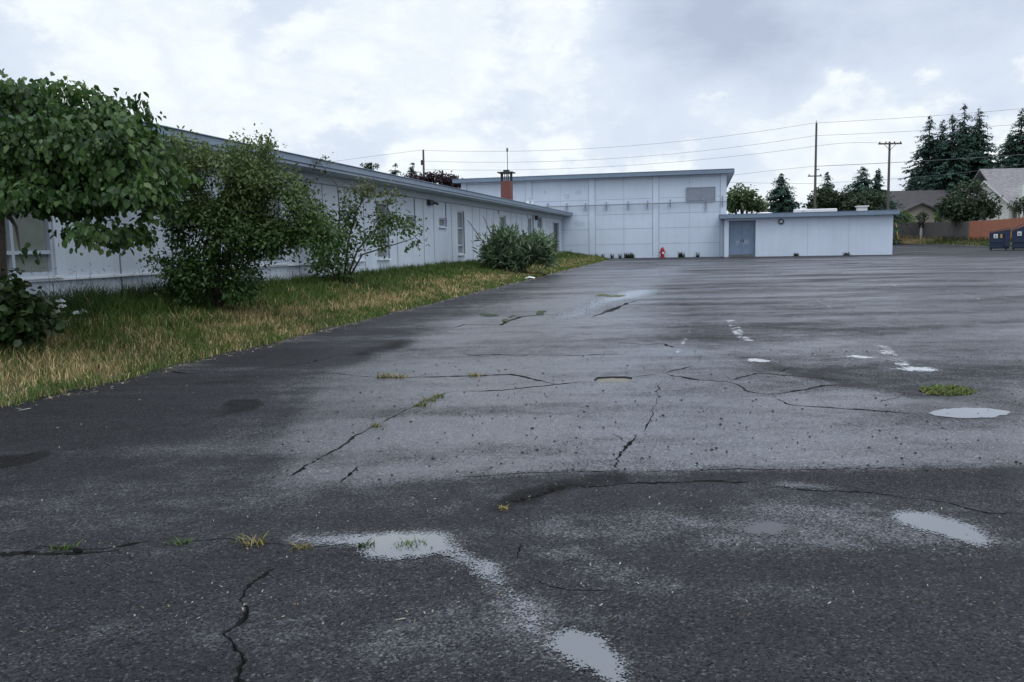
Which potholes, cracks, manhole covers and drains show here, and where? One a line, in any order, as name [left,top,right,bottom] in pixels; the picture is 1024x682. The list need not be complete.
crack [166,353,583,483]
crack [760,482,1019,515]
crack [218,567,276,682]
crack [593,301,635,317]
crack [505,366,919,503]
crack [0,538,358,557]
